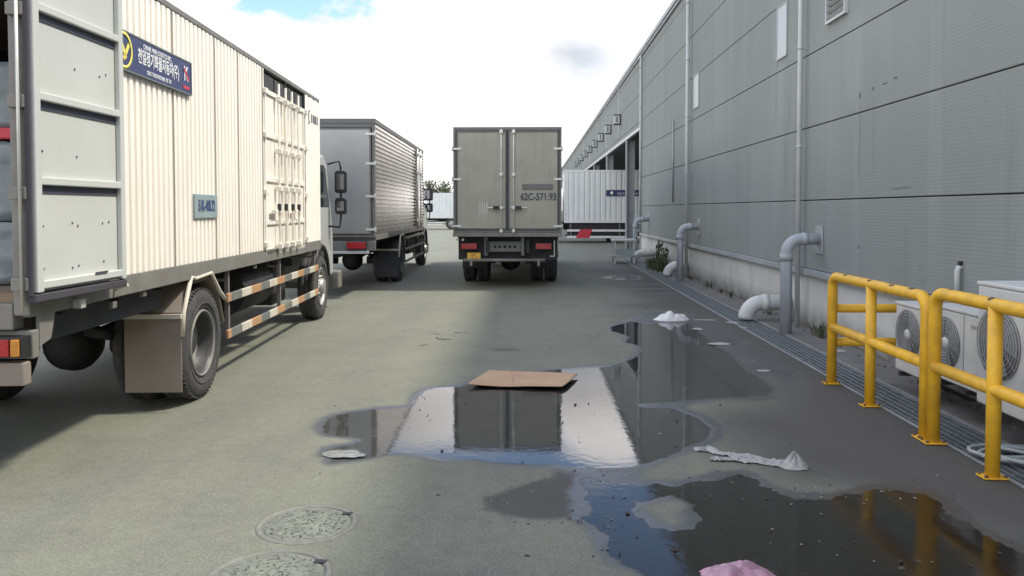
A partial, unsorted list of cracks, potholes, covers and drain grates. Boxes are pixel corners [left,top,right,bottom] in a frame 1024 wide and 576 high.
manhole cover [207,550,332,576]
manhole cover [255,505,357,545]
drain grate [621,259,1024,489]
